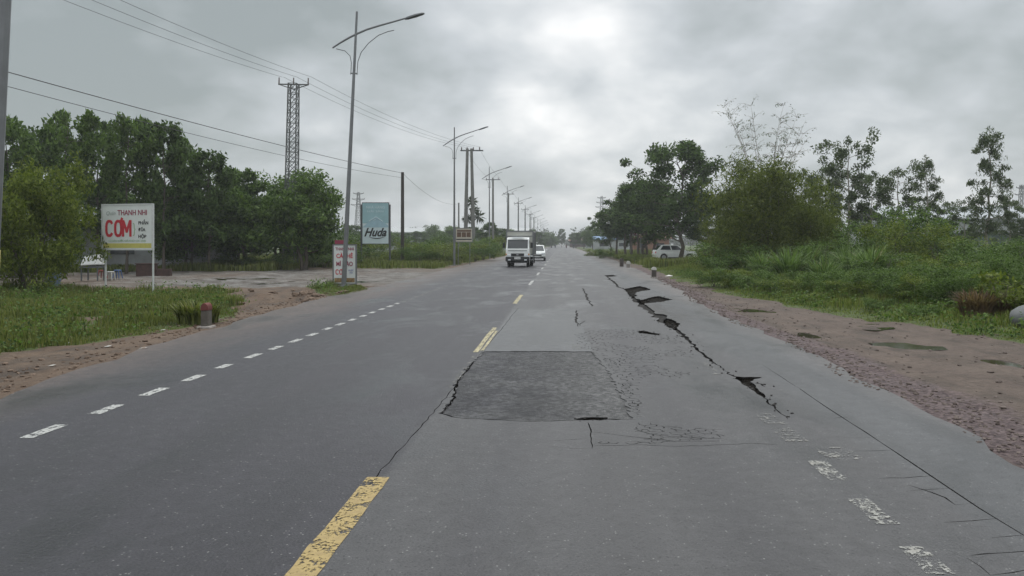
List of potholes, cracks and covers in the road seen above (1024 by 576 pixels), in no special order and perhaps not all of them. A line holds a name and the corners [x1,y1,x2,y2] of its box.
crack [369,310,517,485]
crack [574,277,788,419]
crack [555,423,774,449]
